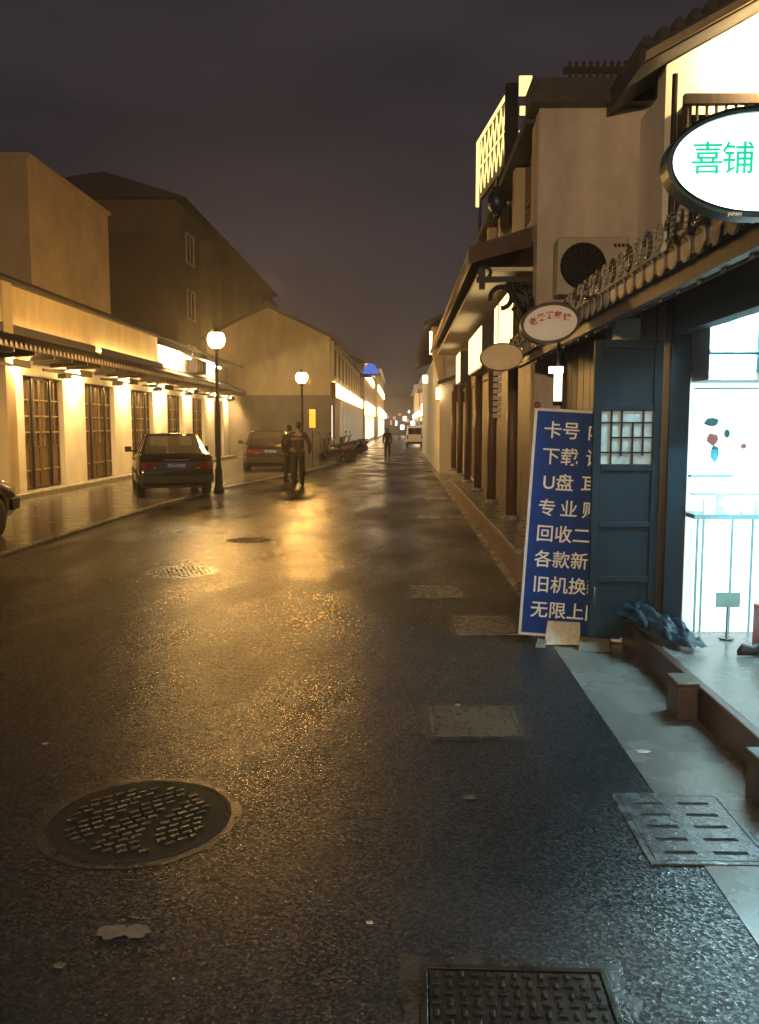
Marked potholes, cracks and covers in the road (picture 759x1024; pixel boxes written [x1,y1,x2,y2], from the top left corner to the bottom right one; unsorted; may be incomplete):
manhole cover [141,565,223,579]
manhole cover [34,778,242,869]
drain grate [610,793,759,866]
